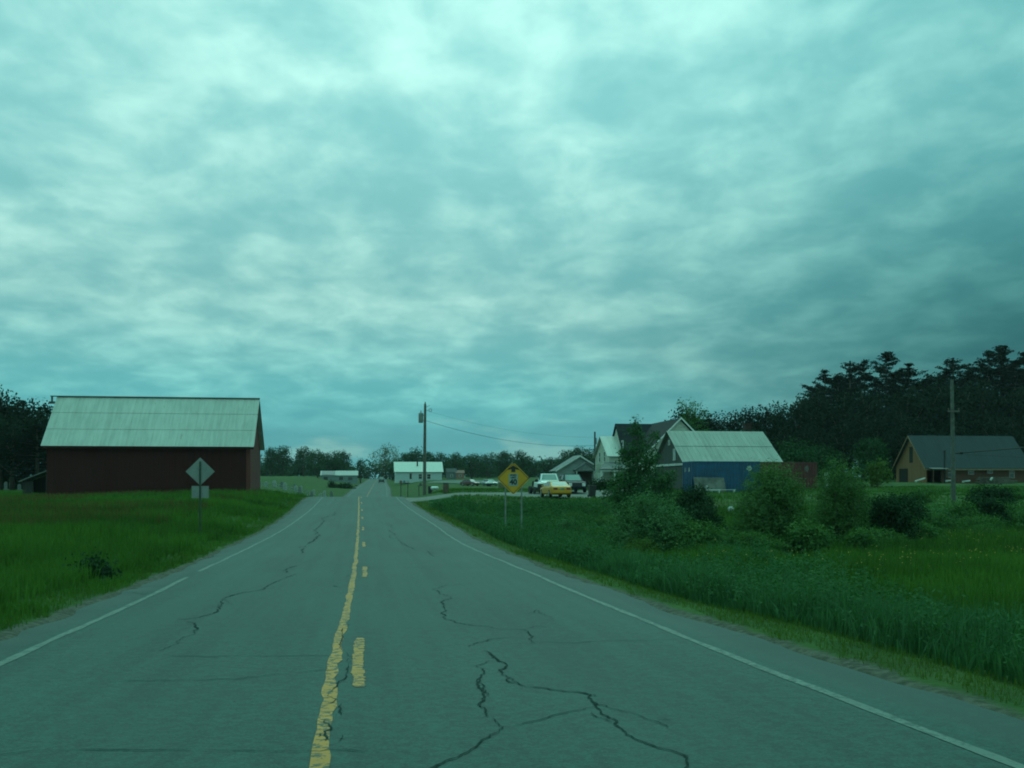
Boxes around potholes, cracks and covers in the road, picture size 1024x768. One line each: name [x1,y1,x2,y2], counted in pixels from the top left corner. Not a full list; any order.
crack [1,513,689,768]
